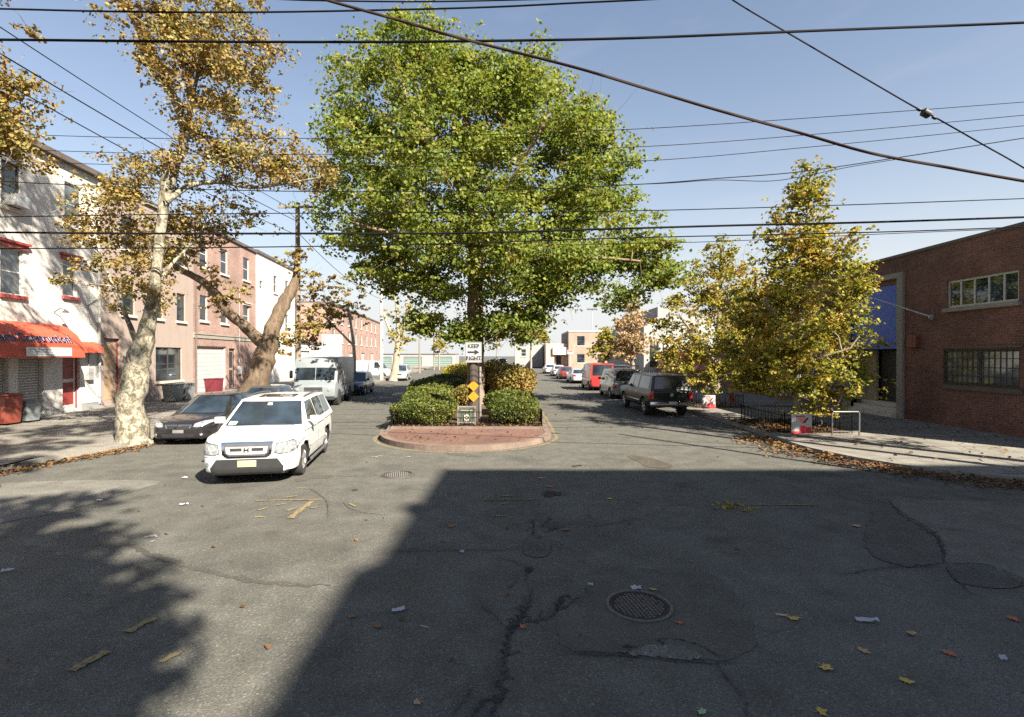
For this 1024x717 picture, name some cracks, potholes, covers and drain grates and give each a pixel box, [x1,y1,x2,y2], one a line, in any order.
manhole cover [381,470,413,478]
crack [398,549,588,717]
manhole cover [606,590,674,623]
